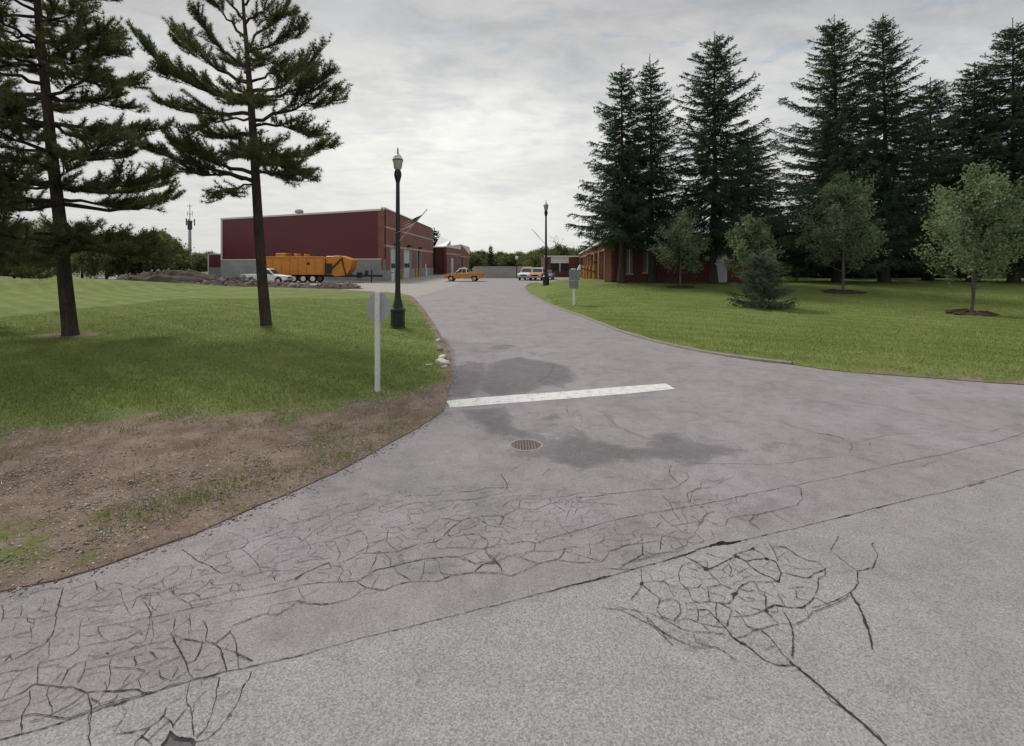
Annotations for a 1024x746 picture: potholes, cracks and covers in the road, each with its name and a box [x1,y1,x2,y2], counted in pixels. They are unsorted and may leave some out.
crack [0,428,1023,746]
pothole [161,731,196,746]
manhole cover [509,439,543,451]
